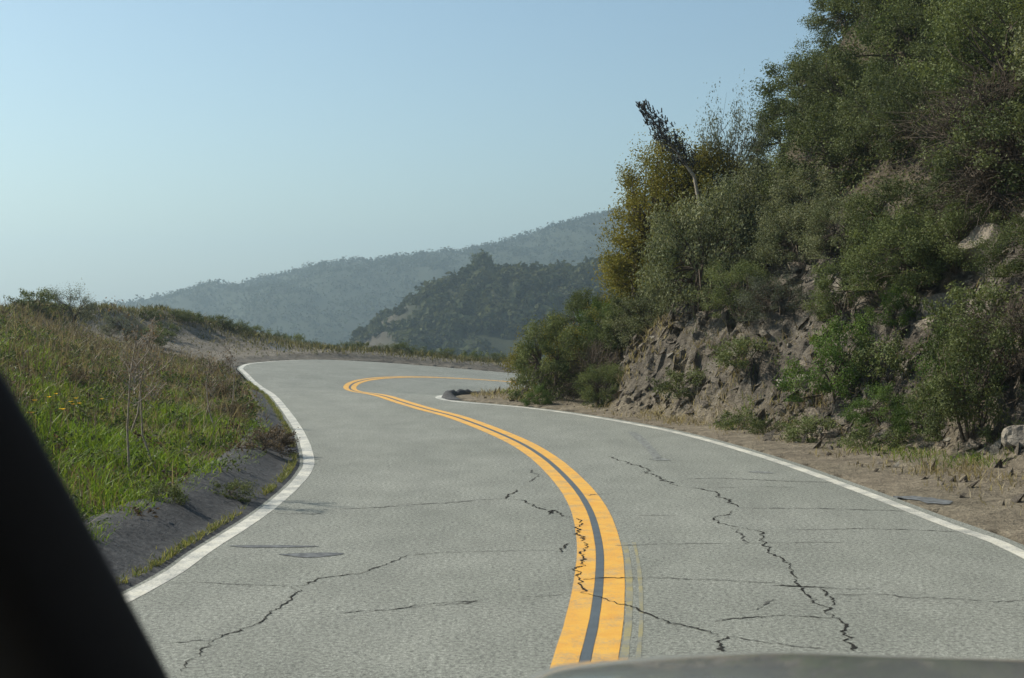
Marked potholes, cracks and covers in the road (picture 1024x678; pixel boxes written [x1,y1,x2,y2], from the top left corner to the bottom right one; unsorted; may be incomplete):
crack [348,457,1024,651]
crack [172,550,519,671]
